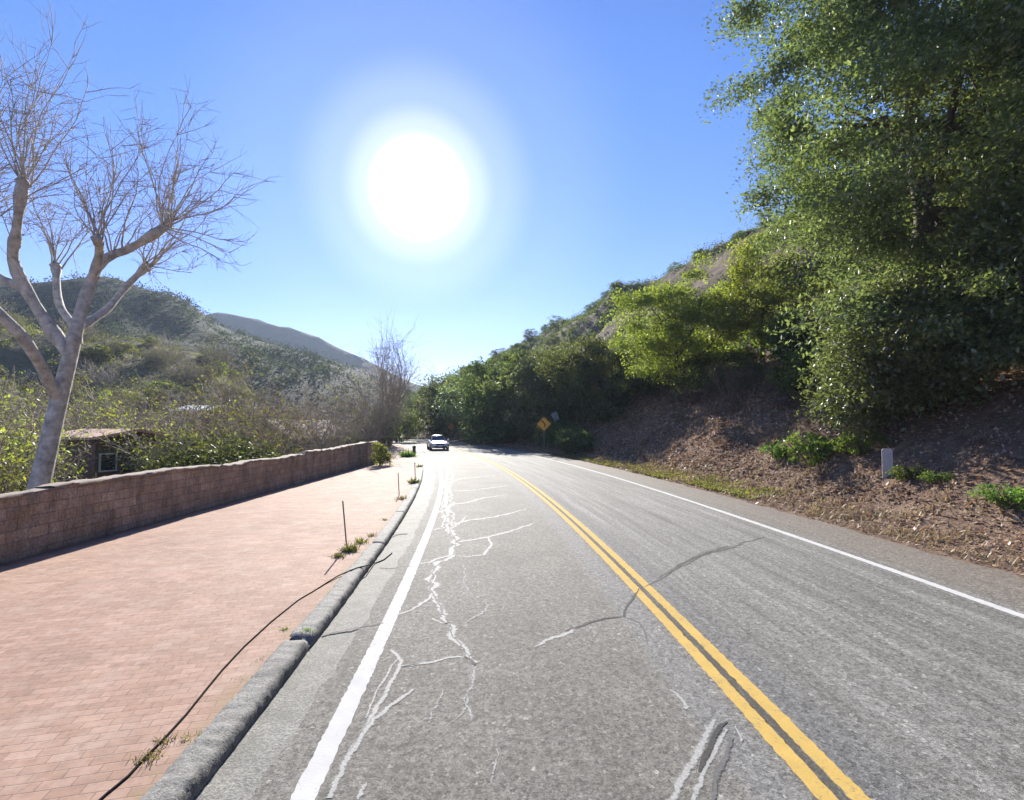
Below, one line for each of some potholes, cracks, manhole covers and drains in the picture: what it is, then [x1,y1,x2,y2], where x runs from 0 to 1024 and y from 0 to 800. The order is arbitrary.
crack [322,453,533,800]
crack [534,537,763,647]
